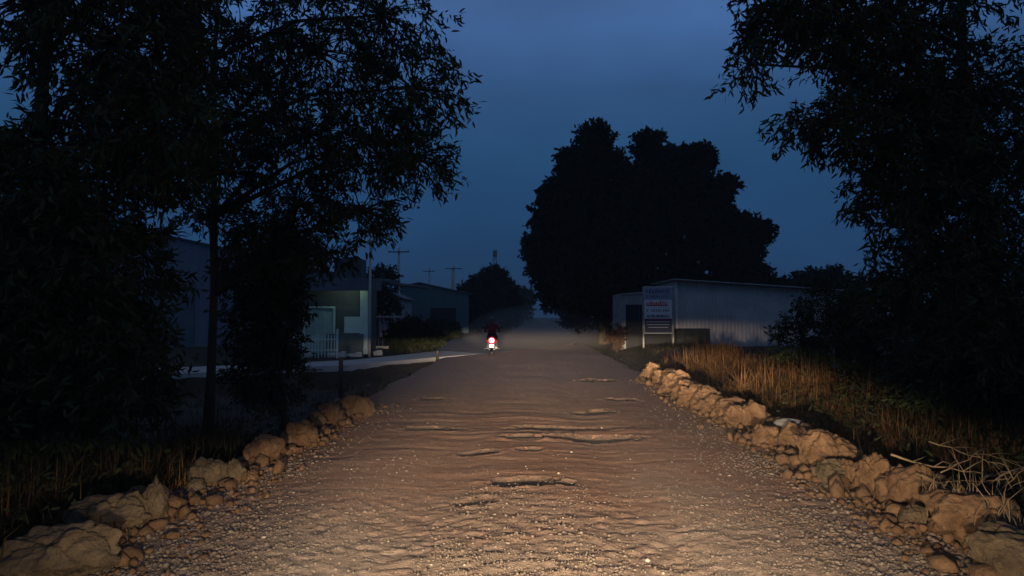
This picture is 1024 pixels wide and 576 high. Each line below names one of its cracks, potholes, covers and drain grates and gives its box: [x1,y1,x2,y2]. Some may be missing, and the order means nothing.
pothole [449,494,498,508]
pothole [568,408,621,416]
pothole [458,448,502,457]
pothole [498,433,545,441]
pothole [555,478,581,487]
pothole [484,475,564,488]
pothole [535,433,649,444]
